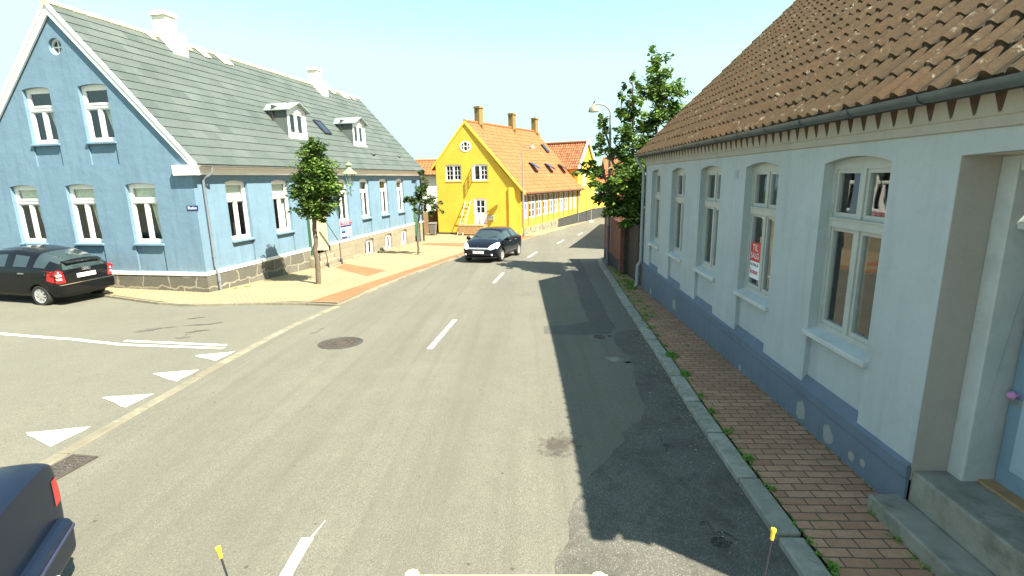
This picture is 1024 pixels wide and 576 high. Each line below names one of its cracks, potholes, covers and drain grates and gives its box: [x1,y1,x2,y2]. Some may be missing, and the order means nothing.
drain grate [51,454,98,480]
pothole [703,534,740,552]
manhole cover [318,337,363,349]
